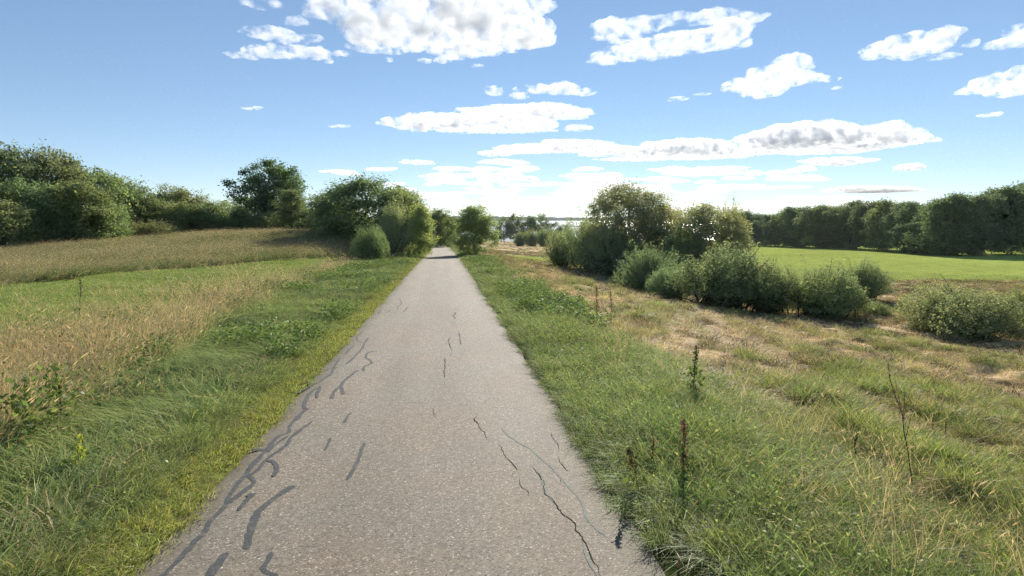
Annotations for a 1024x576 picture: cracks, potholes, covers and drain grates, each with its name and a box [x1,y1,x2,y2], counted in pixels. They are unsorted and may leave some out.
crack [473,414,601,576]
